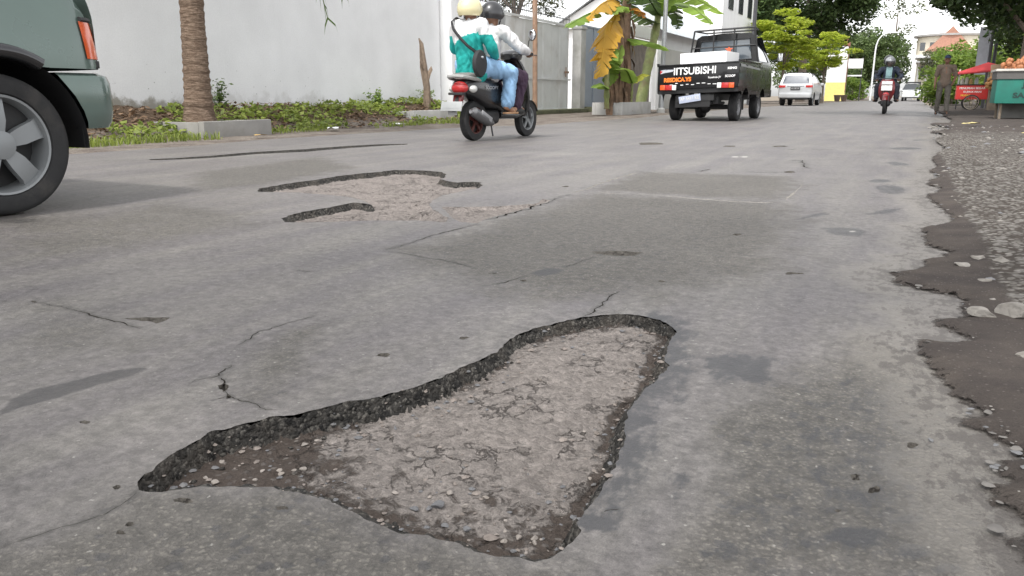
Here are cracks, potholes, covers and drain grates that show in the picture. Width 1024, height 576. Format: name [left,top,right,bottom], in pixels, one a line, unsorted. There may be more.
pothole [138,314,677,562]
crack [42,303,140,329]
pothole [258,170,483,222]
crack [192,365,273,410]
